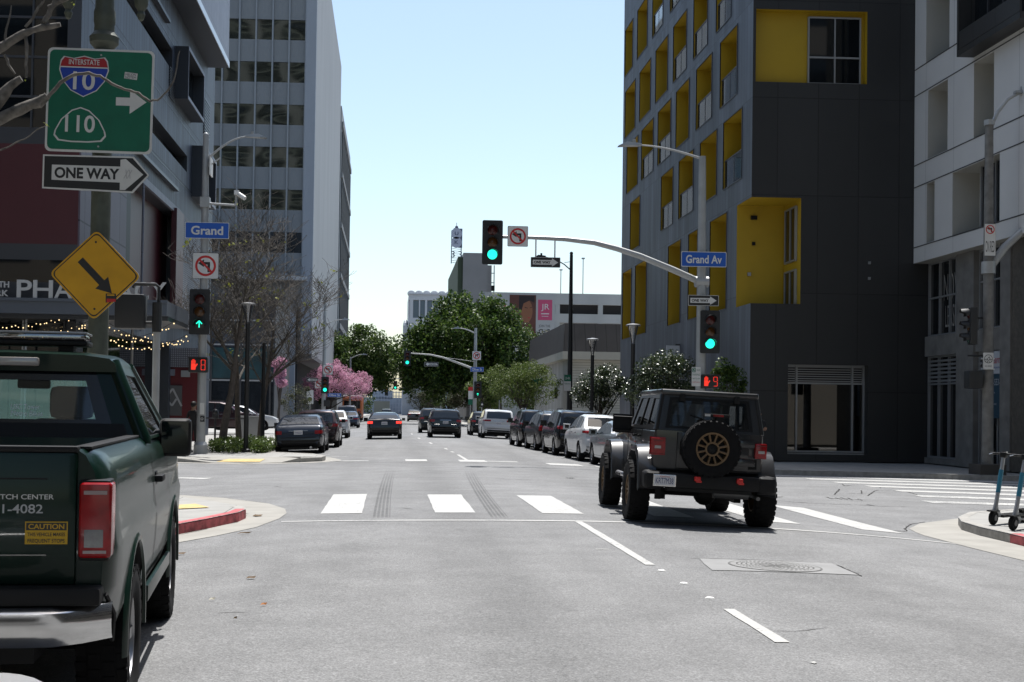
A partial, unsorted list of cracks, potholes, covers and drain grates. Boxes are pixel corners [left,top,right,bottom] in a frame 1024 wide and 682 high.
crack [778,484,917,507]
manhole cover [728,560,822,572]
